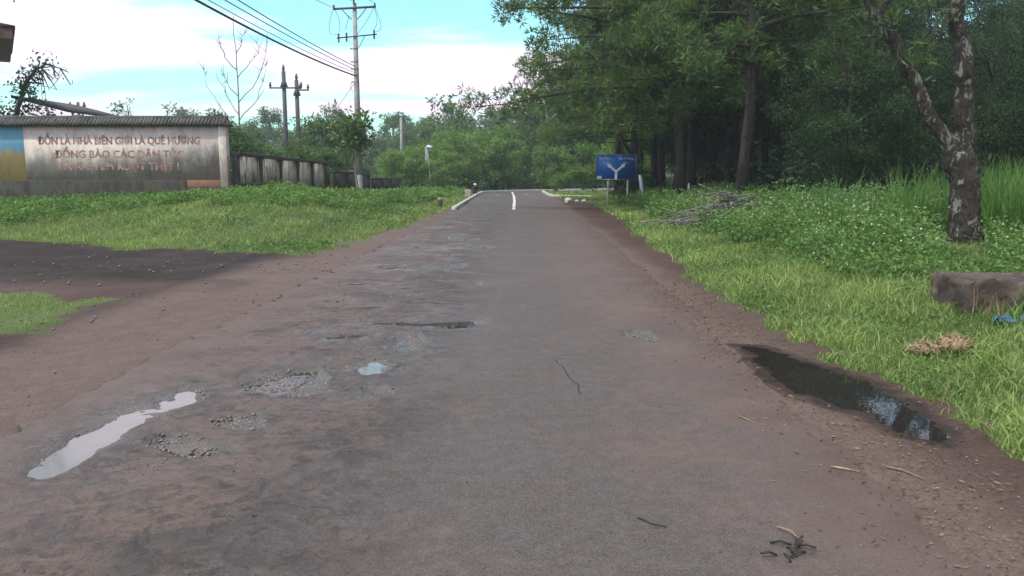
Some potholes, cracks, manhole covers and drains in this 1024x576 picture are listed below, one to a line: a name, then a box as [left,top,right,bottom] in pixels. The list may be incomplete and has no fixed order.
pothole [240,367,333,397]
pothole [208,413,270,430]
pothole [140,430,224,458]
pothole [725,343,968,449]
pothole [388,331,428,353]
crack [552,358,581,395]
pothole [17,386,205,481]
pothole [349,358,397,376]
